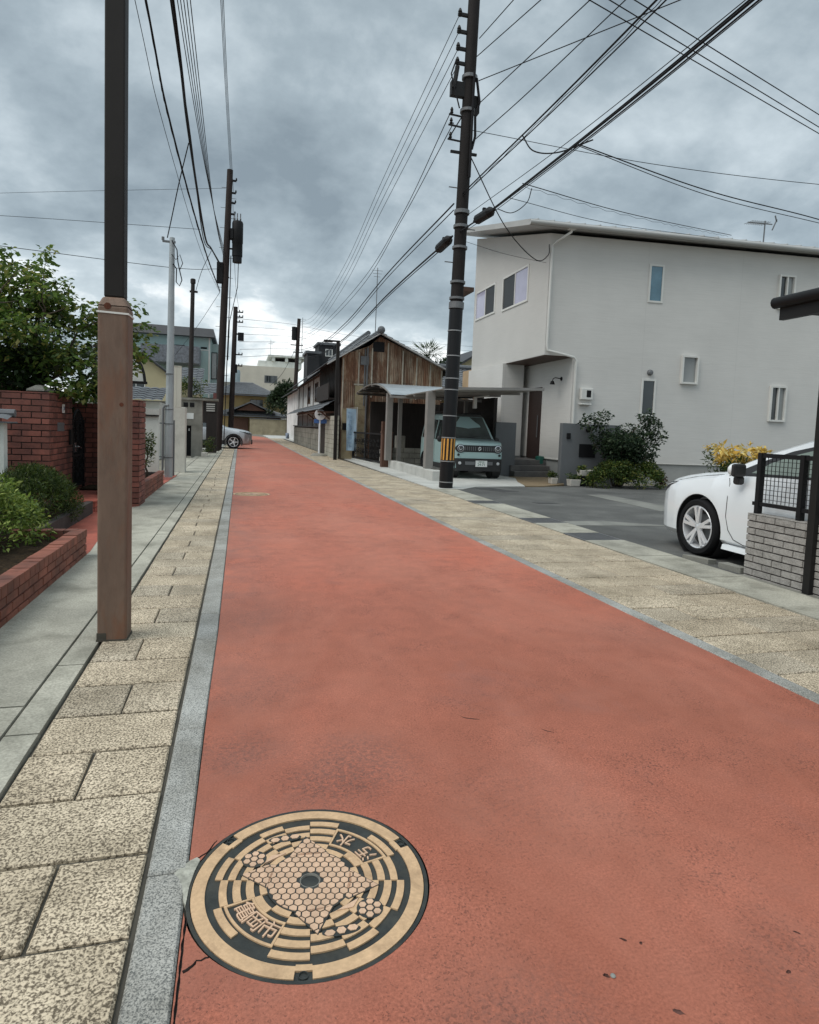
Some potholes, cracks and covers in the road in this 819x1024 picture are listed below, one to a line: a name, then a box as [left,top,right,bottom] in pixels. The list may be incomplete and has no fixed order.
manhole cover [185,809,428,985]
